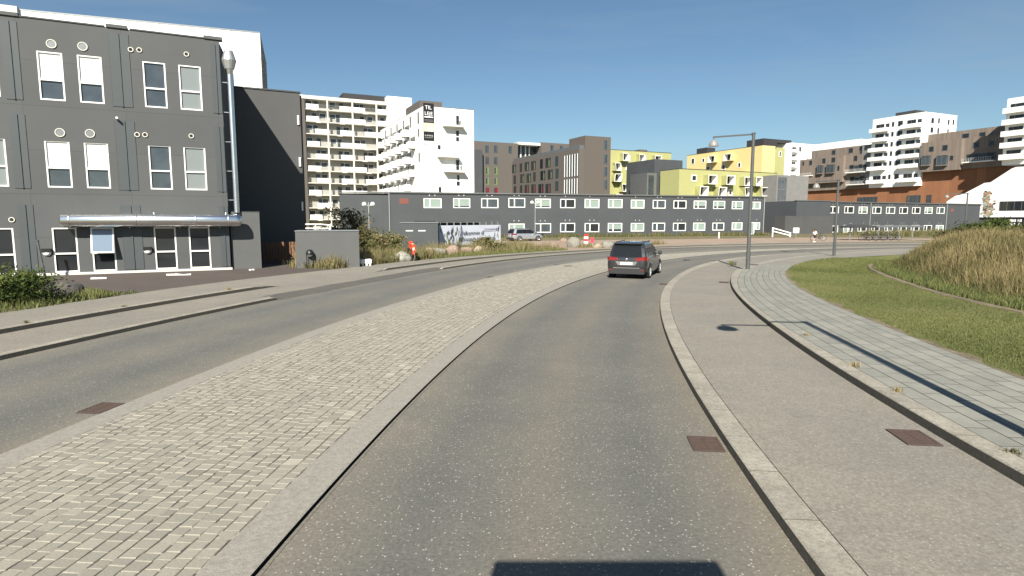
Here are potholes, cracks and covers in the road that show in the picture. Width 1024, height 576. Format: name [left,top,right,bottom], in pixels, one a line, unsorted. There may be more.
manhole cover [886,429,944,447]
manhole cover [76,402,125,414]
manhole cover [686,436,726,453]
